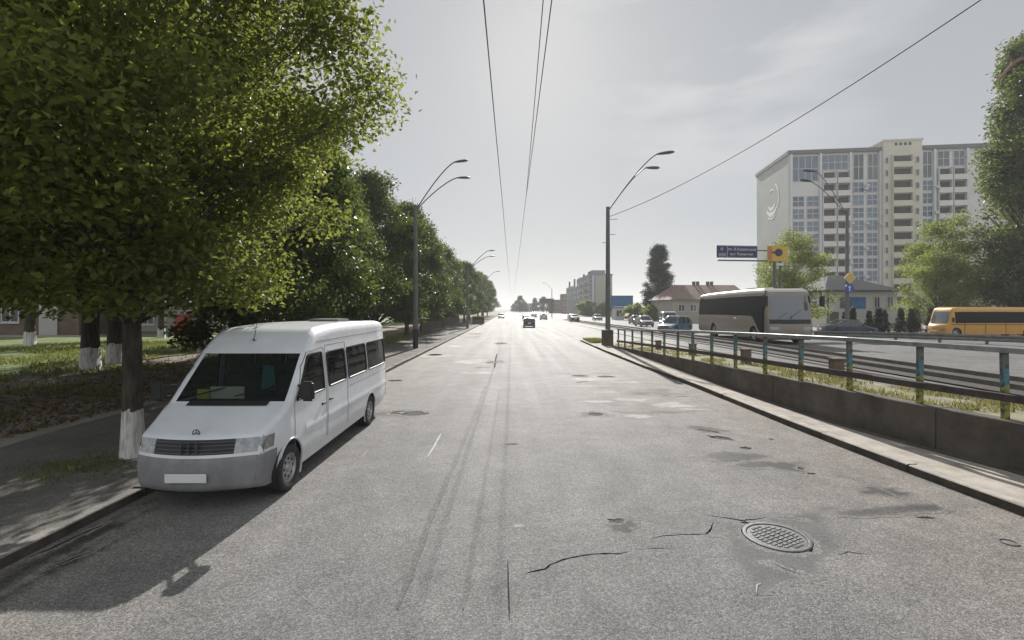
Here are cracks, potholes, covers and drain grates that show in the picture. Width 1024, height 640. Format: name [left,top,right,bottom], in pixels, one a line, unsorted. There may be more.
crack [522,513,765,575]
manhole cover [741,522,814,553]
